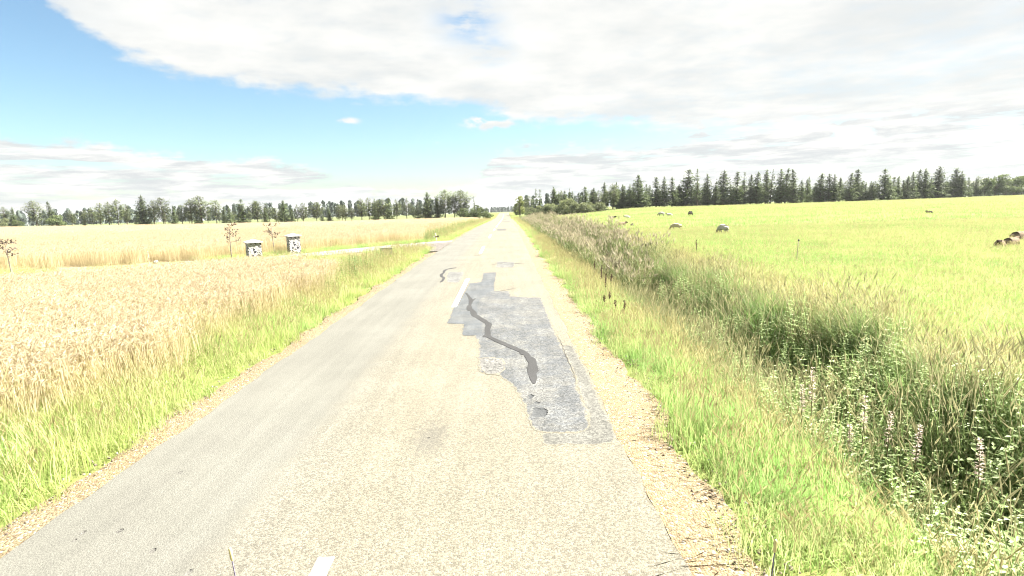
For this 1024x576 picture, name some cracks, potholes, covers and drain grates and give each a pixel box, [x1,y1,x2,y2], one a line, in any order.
crack [465,288,539,384]
pothole [531,407,548,417]
